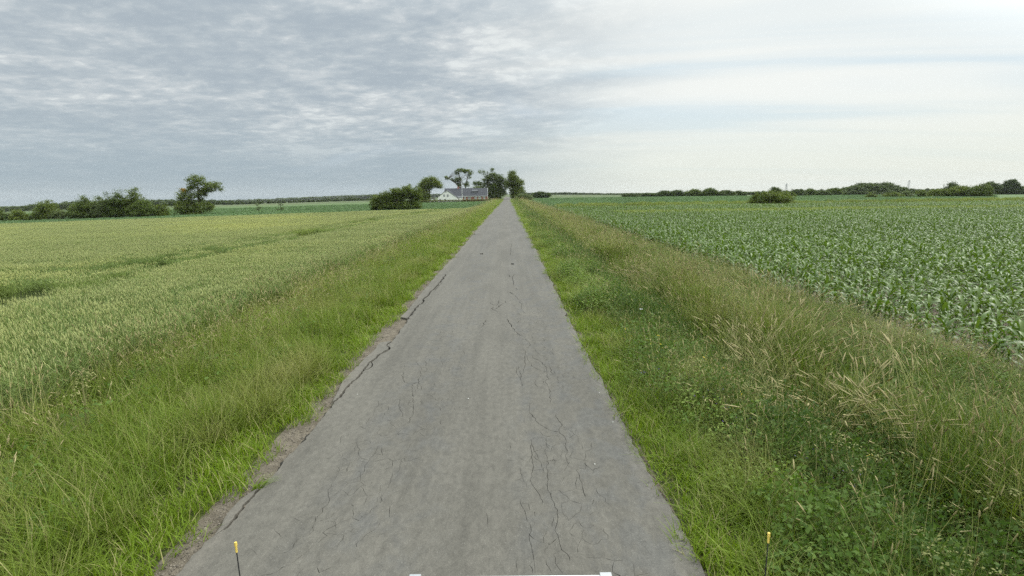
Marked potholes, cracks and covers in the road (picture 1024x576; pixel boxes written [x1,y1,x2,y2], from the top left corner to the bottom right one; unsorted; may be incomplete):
crack [214,274,648,576]
